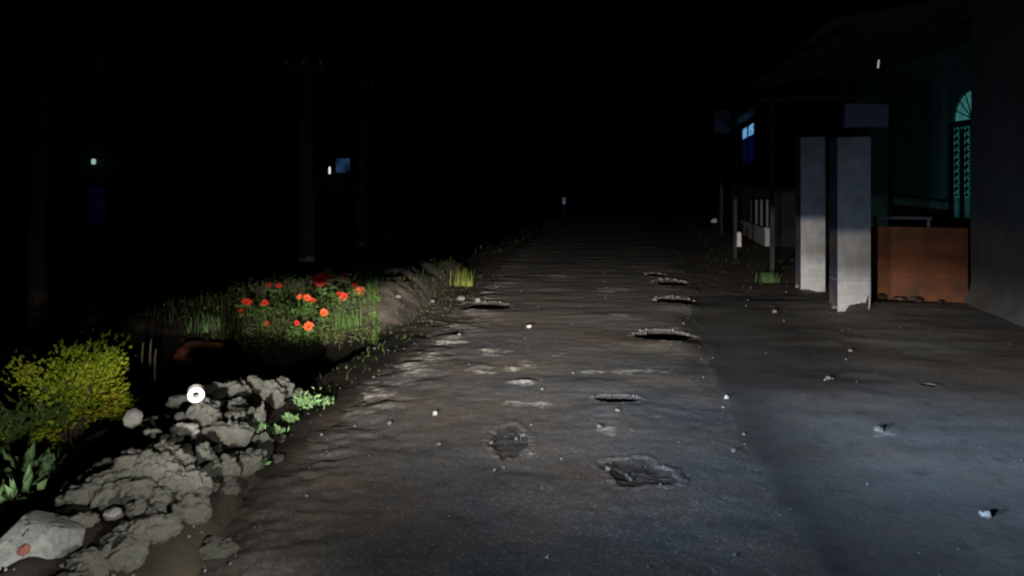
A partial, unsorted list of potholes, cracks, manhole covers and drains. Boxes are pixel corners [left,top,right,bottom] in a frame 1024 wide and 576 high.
pothole [625,328,701,342]
pothole [647,278,701,287]
pothole [586,392,648,404]
pothole [589,454,688,491]
pothole [481,421,537,463]
pothole [647,295,696,306]
pothole [454,300,518,311]
